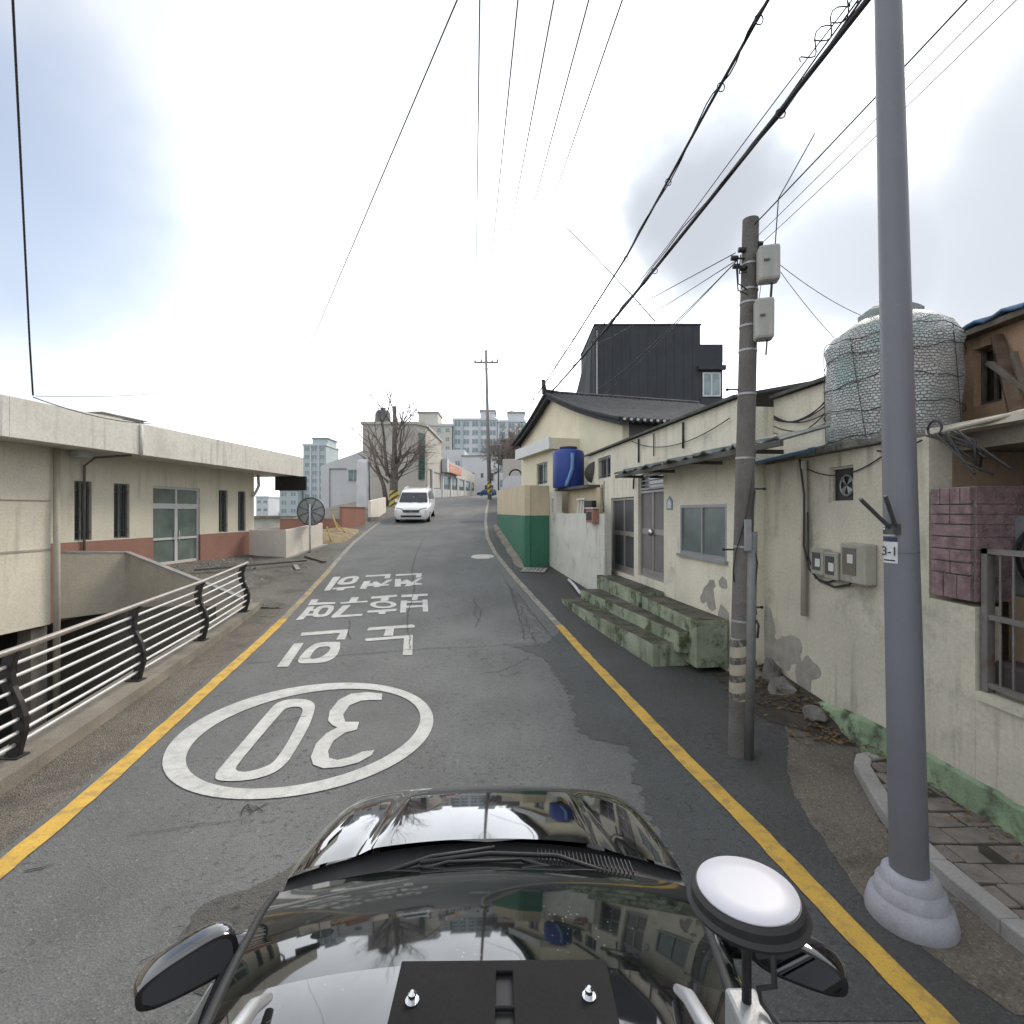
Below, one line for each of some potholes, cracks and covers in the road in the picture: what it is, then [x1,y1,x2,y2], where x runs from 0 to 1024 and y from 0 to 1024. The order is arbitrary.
crack [125,803,267,837]
